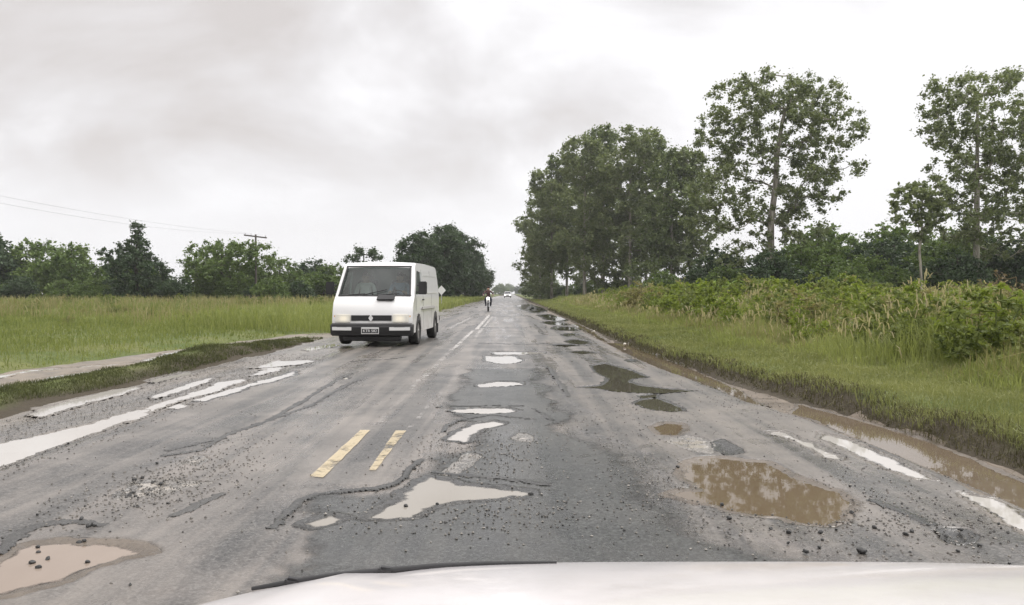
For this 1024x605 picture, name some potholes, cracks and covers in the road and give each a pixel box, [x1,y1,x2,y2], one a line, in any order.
pothole [631,398,687,412]
pothole [354,475,542,521]
pothole [441,420,508,444]
pothole [814,431,941,481]
pothole [481,355,524,364]
pothole [647,421,690,436]
pothole [535,314,568,322]
pothole [577,363,694,396]
pothole [657,456,860,527]
pothole [0,537,162,600]
